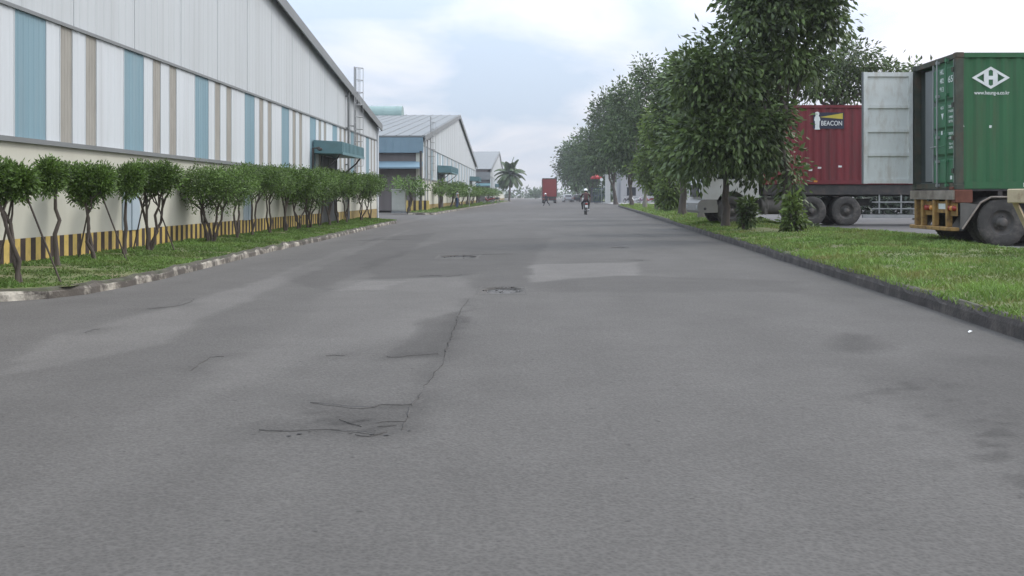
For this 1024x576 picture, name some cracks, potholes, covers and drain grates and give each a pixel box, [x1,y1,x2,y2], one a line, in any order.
crack [259,392,423,437]
